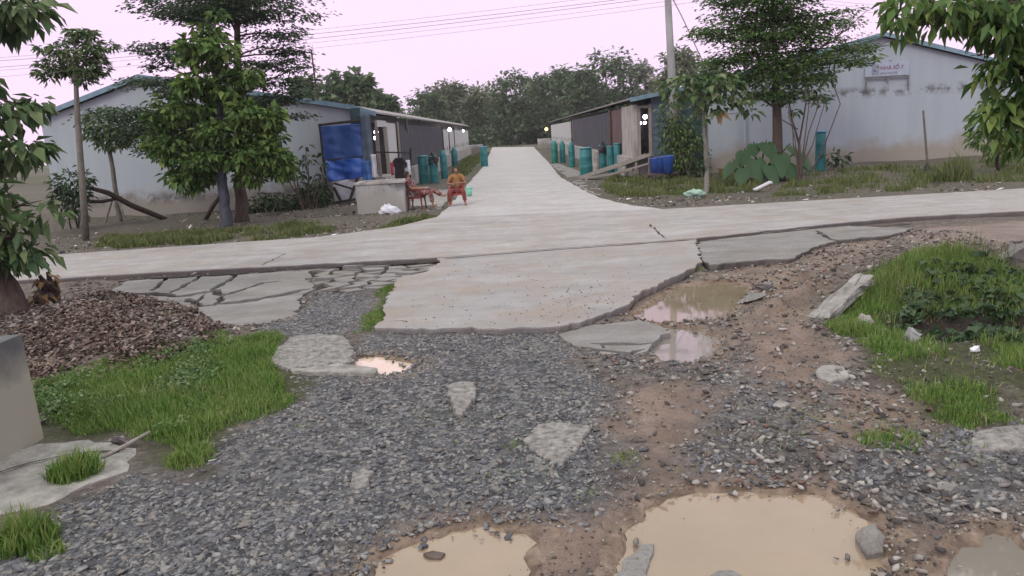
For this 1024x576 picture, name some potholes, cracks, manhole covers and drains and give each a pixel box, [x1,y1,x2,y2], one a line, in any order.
pothole [593,481,920,576]
pothole [627,280,756,324]
crack [127,220,912,307]
pothole [355,352,423,376]
pothole [351,517,562,576]
pothole [648,323,728,363]
